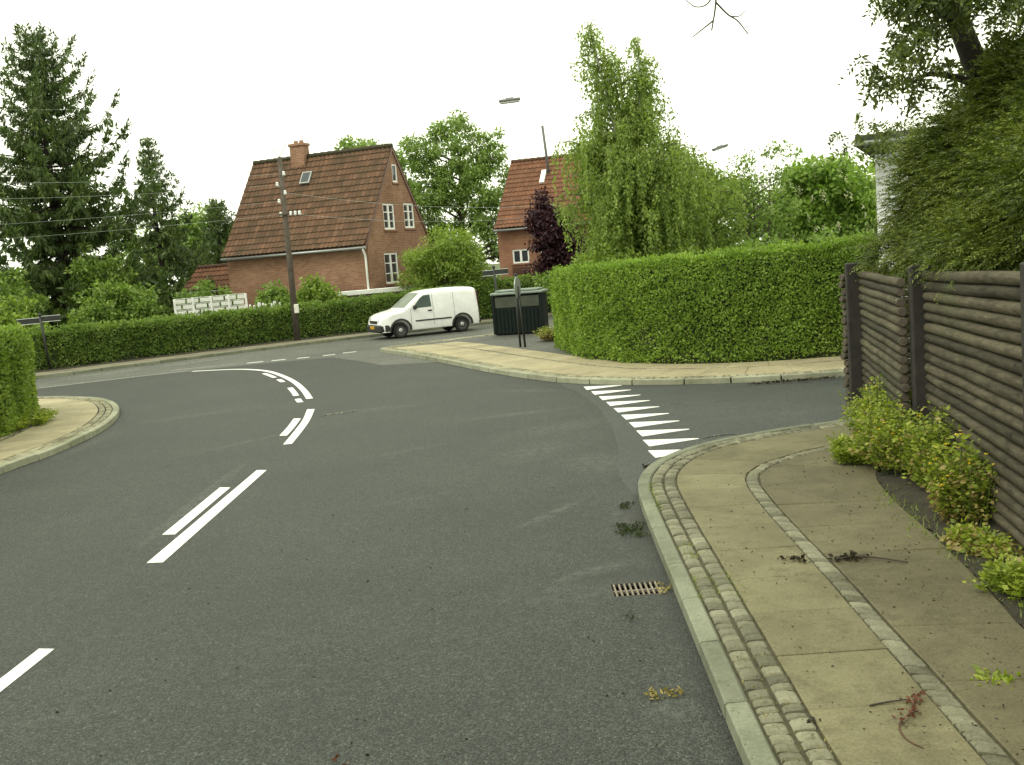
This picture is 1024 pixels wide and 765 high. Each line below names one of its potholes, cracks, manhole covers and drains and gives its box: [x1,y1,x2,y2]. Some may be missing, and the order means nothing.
drain grate [608,580,667,598]
